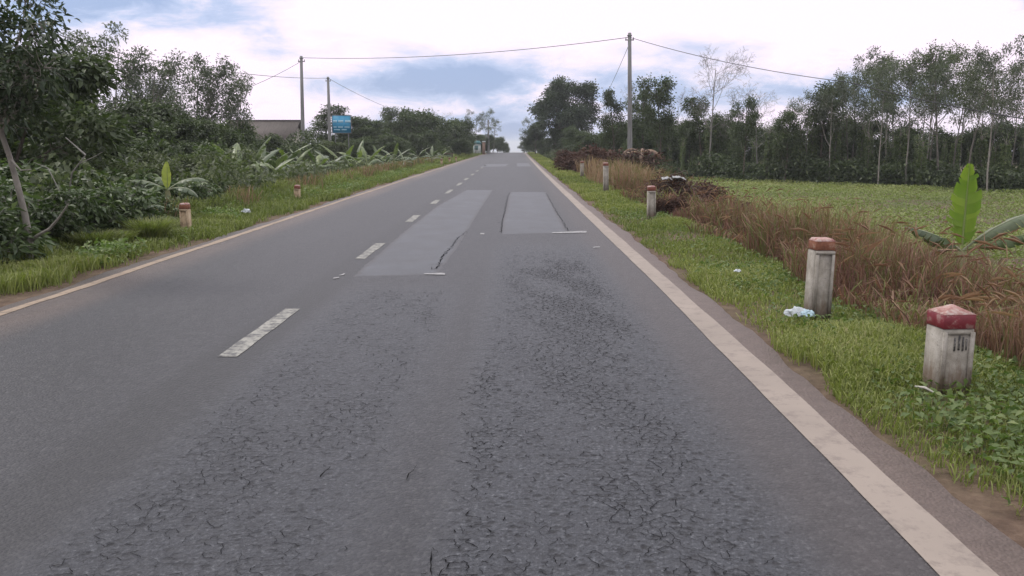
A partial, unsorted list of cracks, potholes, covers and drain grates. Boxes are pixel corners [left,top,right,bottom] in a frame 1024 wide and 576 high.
crack [48,290,439,576]
